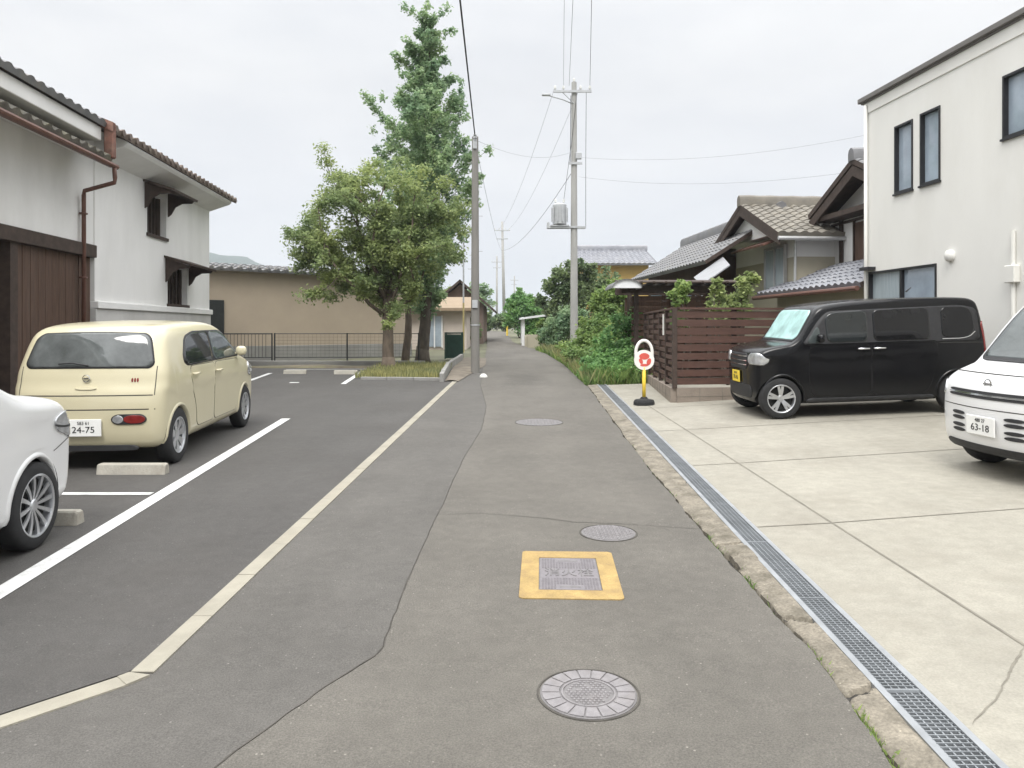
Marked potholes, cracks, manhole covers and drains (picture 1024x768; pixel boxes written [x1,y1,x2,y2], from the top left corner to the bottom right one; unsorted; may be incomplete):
manhole cover [519,551,624,600]
crack [973,648,1024,723]
drain grate [597,384,1009,768]
manhole cover [537,669,641,722]
manhole cover [579,524,638,542]
